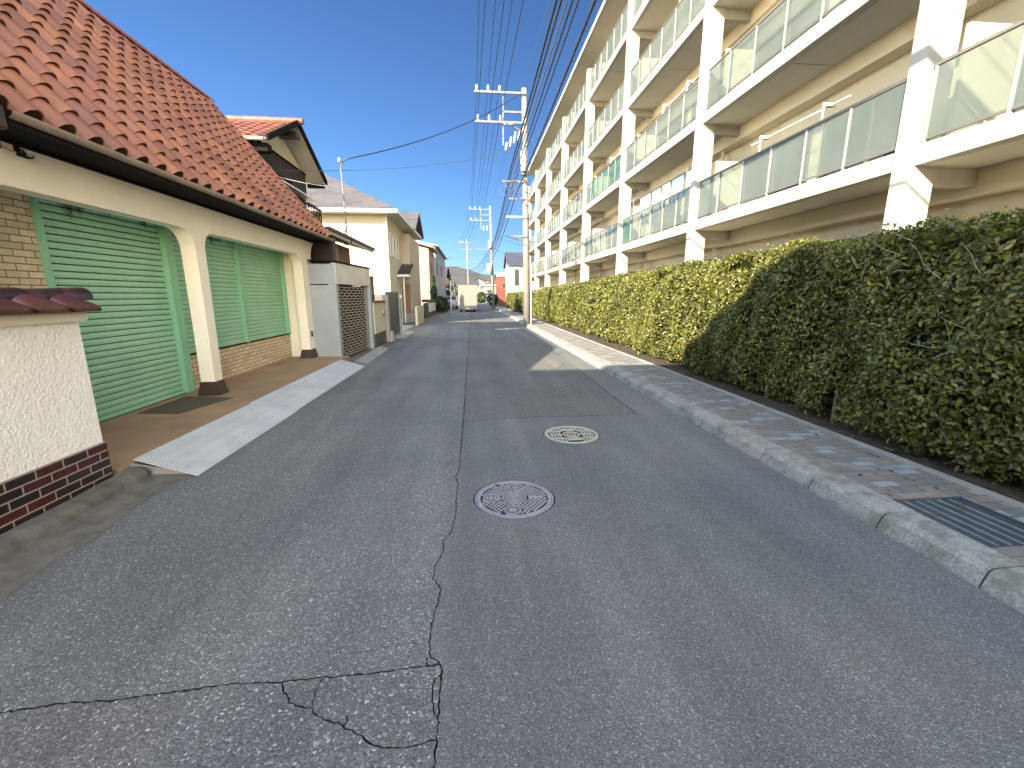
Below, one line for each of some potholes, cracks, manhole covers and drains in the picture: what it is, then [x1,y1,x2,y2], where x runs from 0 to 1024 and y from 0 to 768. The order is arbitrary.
manhole cover [475,481,554,519]
drain grate [892,496,1024,547]
crack [282,318,481,768]
manhole cover [544,426,599,444]
